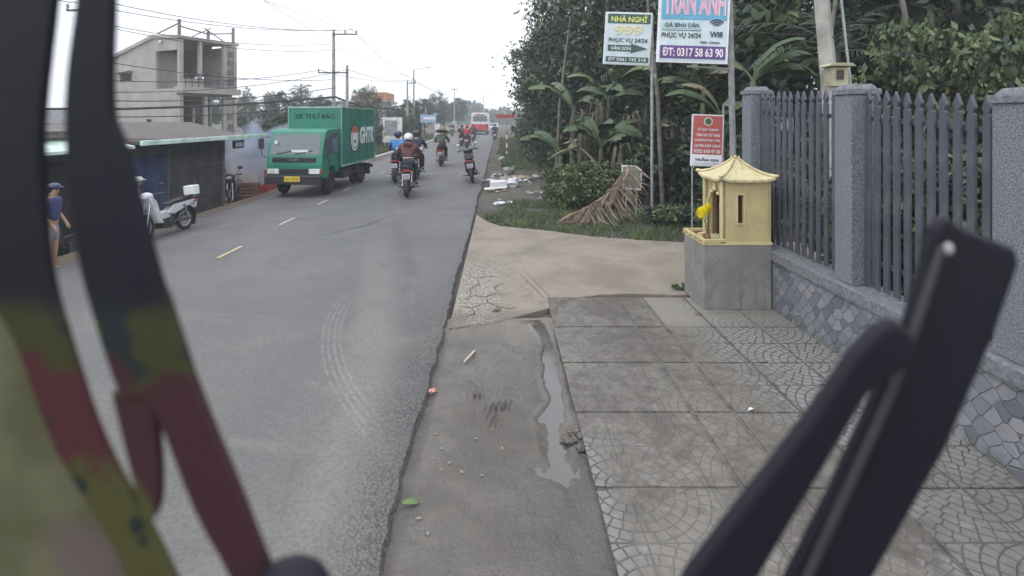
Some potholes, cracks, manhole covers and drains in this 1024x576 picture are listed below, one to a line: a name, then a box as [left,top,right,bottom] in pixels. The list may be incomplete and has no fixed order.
crack [462,276,540,321]
